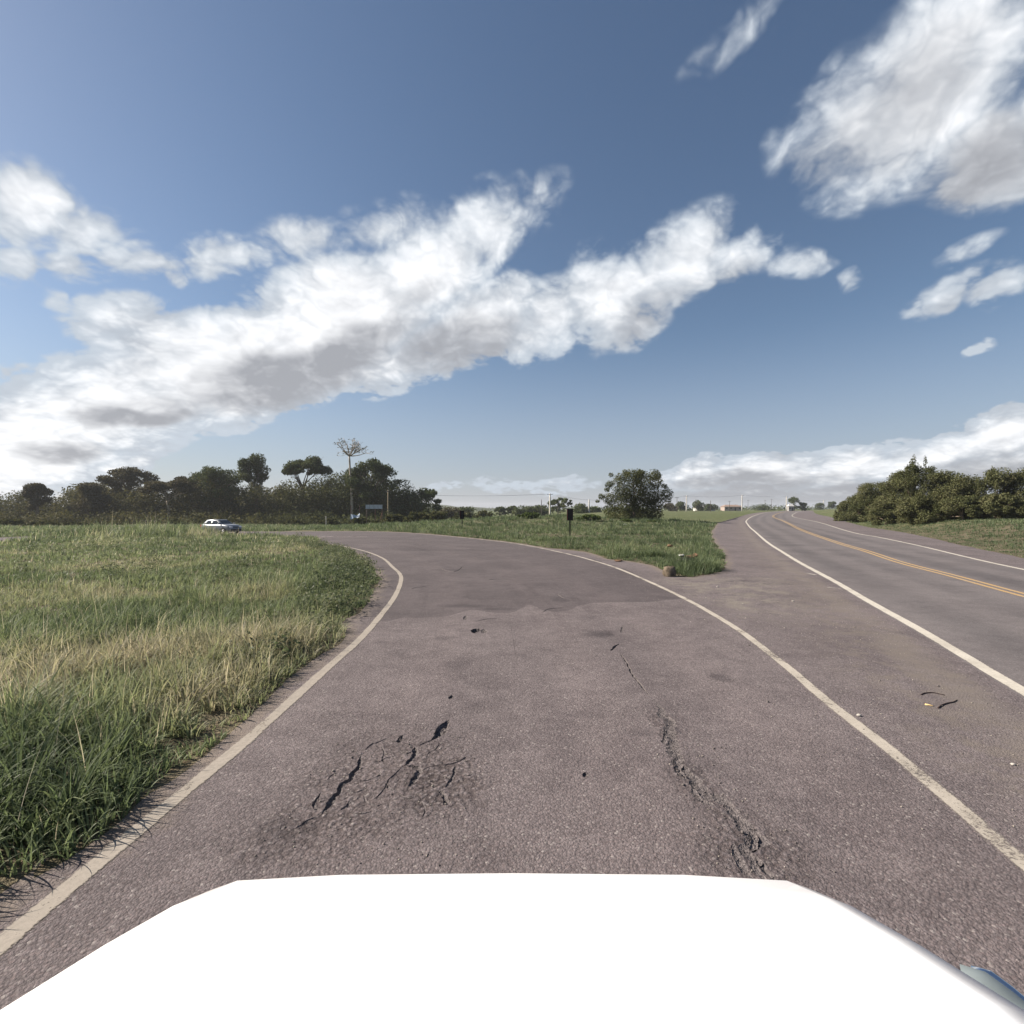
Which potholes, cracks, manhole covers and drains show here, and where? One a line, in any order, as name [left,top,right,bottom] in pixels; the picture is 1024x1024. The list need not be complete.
crack [611,644,776,880]
